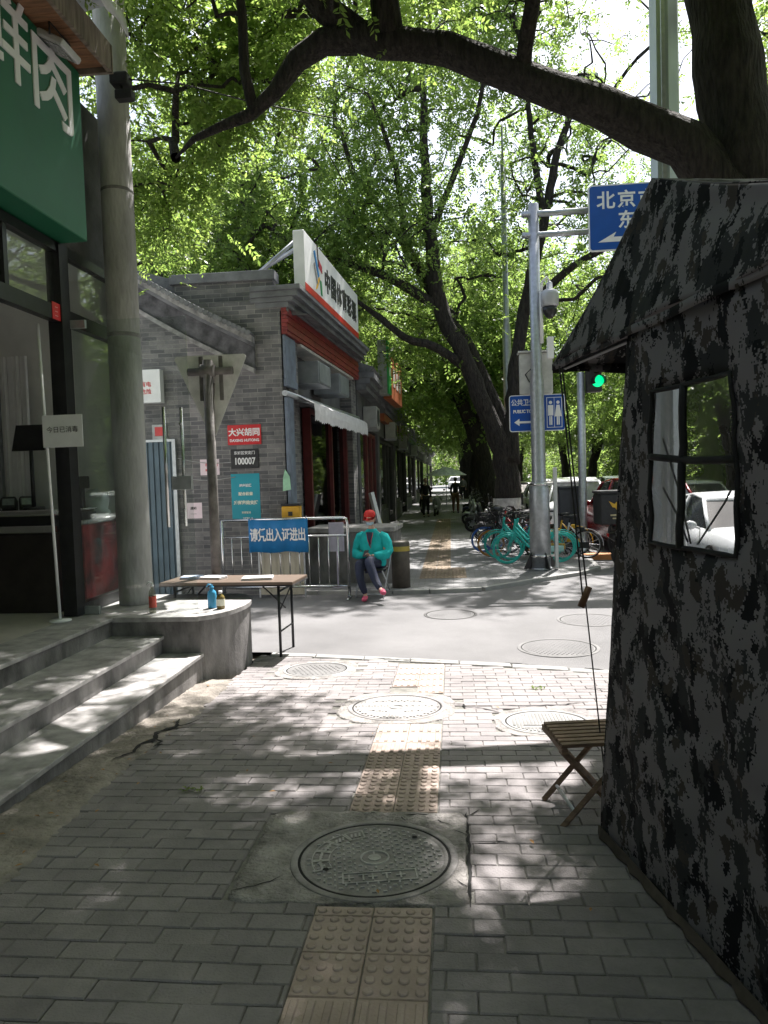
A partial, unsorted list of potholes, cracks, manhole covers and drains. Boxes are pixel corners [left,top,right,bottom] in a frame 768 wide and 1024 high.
crack [113,719,199,759]
manhole cover [557,613,612,627]
manhole cover [273,661,358,680]
manhole cover [336,692,455,725]
manhole cover [228,811,470,910]
manhole cover [517,639,601,658]
manhole cover [424,609,477,620]
manhole cover [494,708,597,738]
